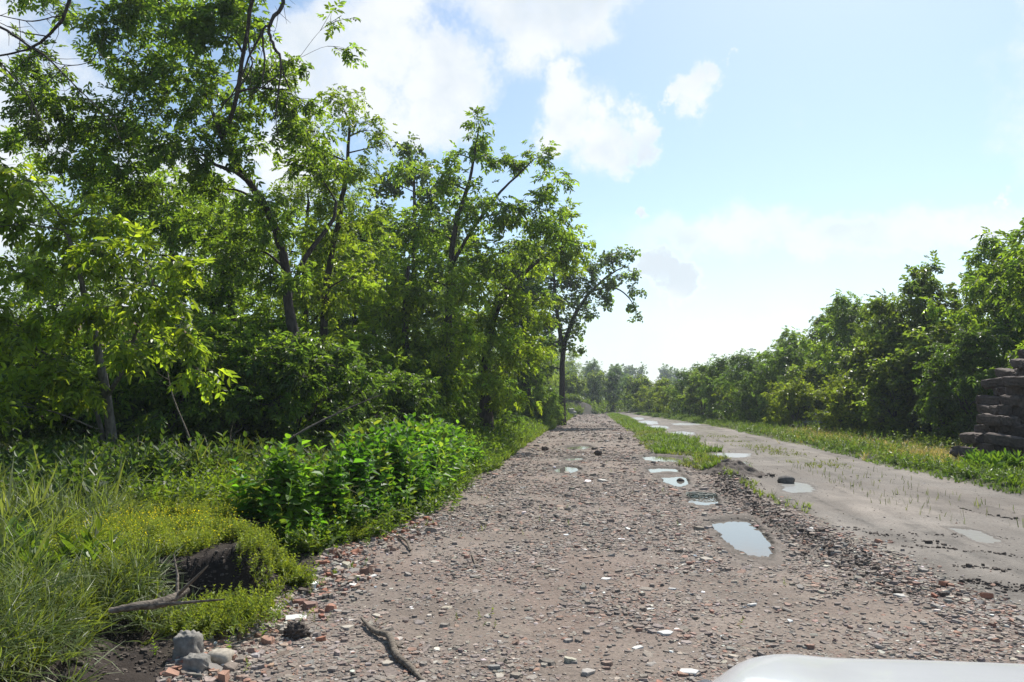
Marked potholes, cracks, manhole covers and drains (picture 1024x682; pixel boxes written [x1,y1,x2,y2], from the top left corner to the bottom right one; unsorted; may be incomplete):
pothole [698,513,788,566]
pothole [681,491,726,509]
pothole [652,471,696,489]
pothole [546,464,588,475]
pothole [639,465,686,477]
pothole [632,454,693,463]
